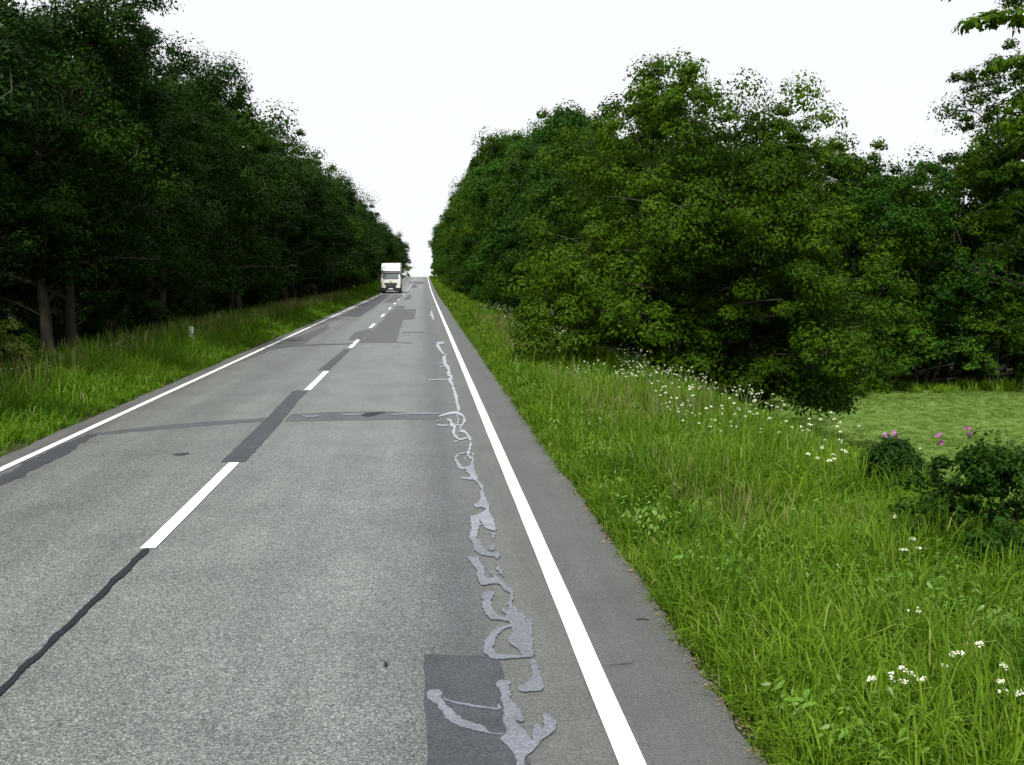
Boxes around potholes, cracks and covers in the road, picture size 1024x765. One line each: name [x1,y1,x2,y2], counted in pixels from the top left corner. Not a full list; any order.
crack [427,342,557,765]
